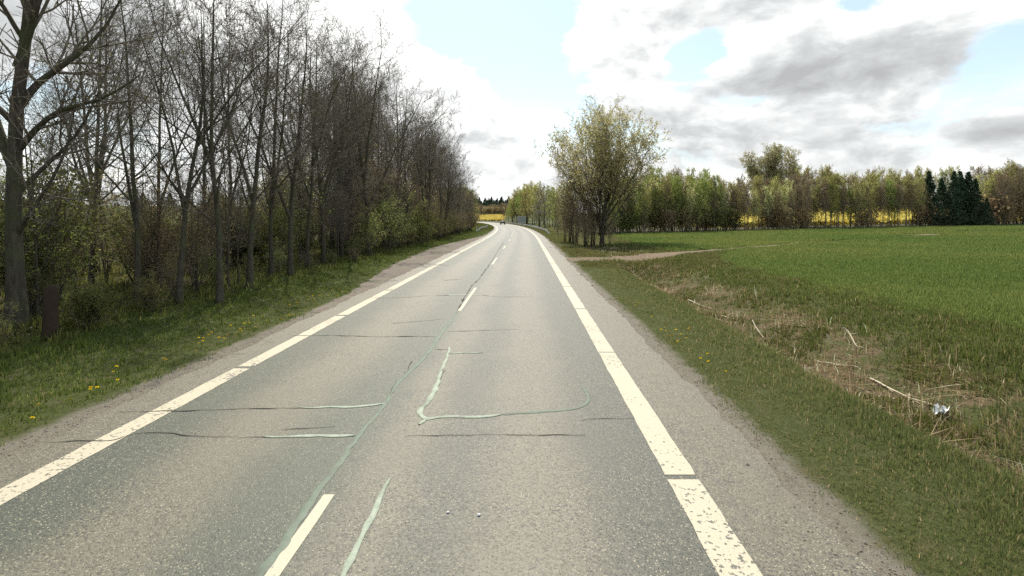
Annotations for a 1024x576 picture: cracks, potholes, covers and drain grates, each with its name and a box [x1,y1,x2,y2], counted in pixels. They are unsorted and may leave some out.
crack [61,426,356,442]
crack [299,319,514,337]
